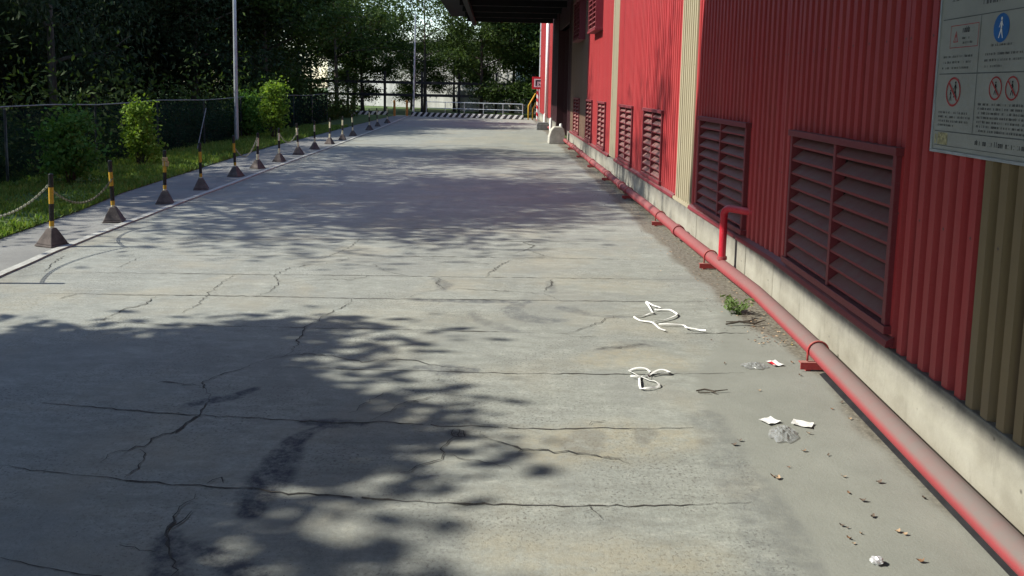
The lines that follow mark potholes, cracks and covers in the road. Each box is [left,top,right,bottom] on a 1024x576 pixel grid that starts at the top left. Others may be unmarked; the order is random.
crack [407,429,630,472]
crack [104,304,448,476]
crack [260,241,403,295]
crack [121,477,223,576]
